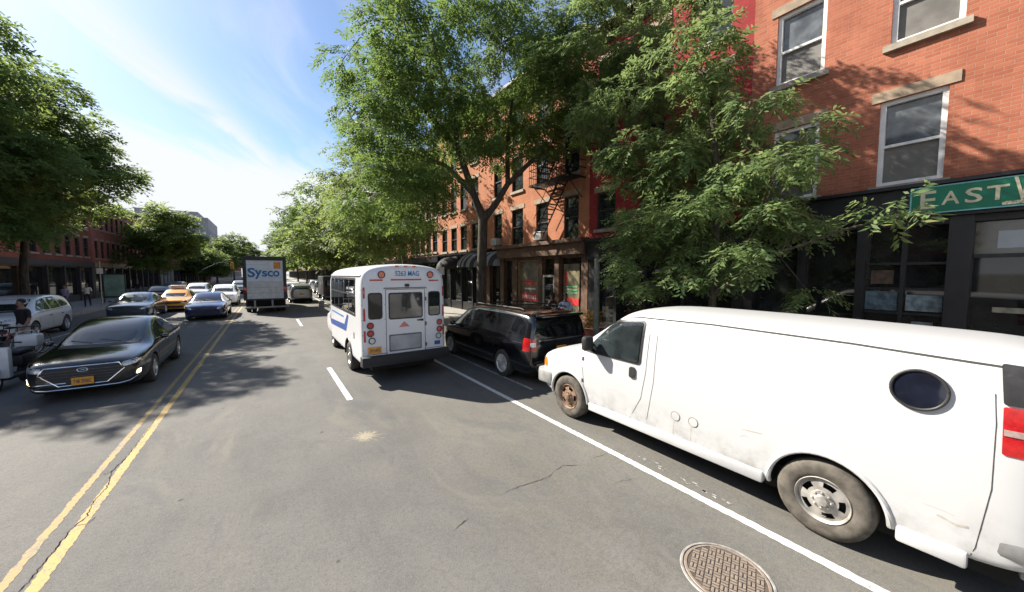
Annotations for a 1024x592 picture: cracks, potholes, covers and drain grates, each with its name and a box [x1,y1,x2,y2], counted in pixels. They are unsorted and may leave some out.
manhole cover [680,542,777,592]
